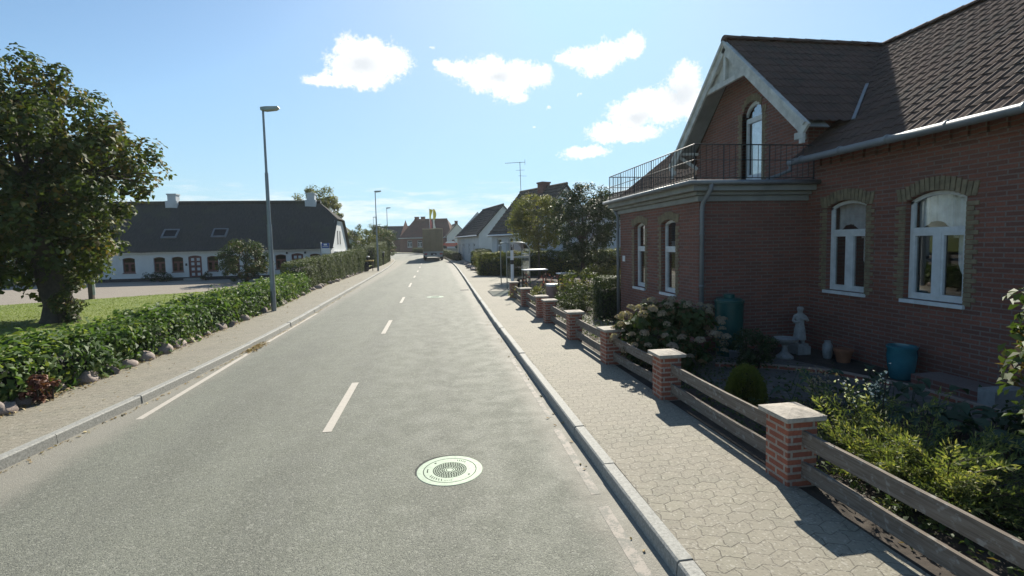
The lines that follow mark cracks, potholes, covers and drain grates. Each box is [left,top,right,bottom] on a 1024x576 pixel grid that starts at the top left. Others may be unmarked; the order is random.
manhole cover [416,456,483,486]
